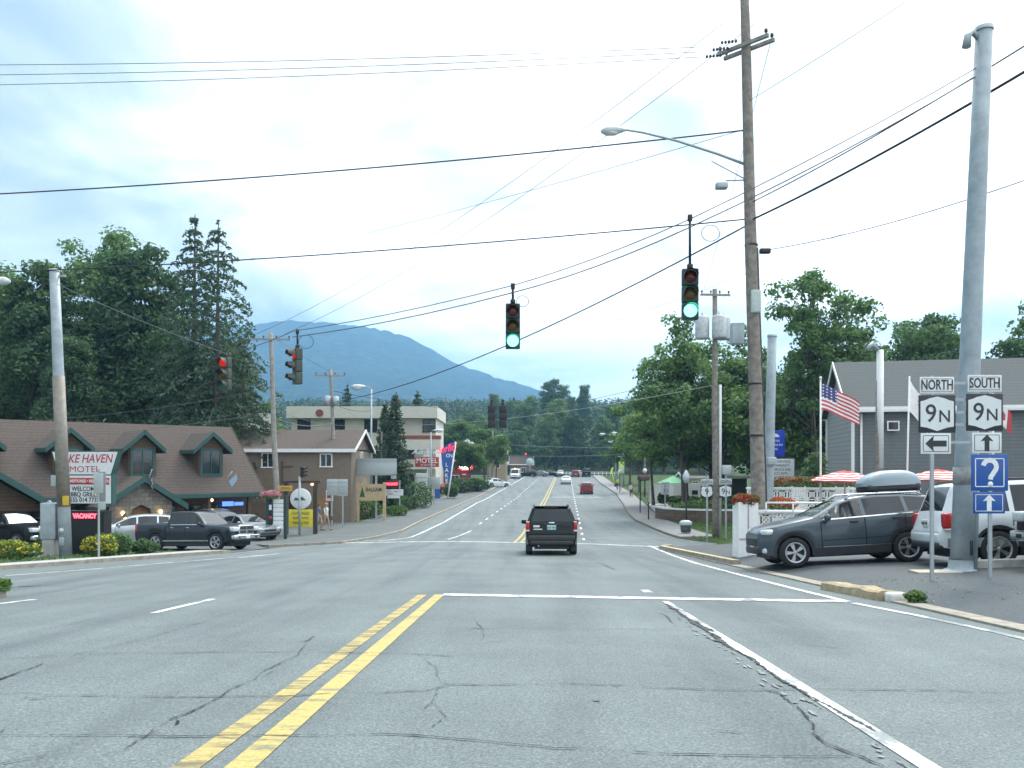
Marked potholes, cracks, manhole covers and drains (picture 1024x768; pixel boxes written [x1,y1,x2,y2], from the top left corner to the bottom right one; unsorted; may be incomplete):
crack [0,613,1001,766]
